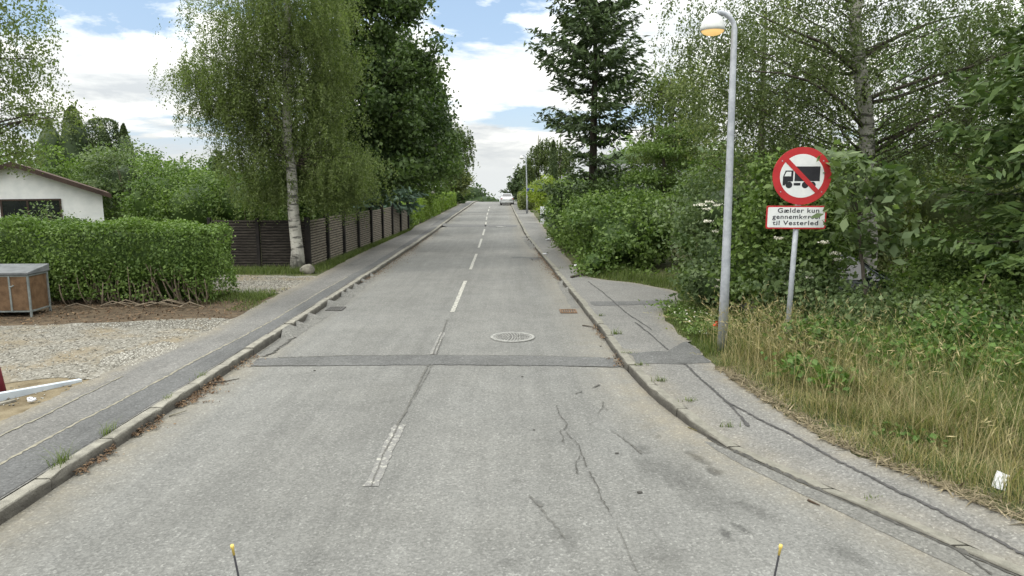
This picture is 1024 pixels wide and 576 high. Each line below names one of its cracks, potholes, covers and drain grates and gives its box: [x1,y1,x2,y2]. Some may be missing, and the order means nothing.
crack [529,494,565,537]
crack [556,384,640,576]
manhole cover [490,332,535,342]
crack [588,281,669,350]
